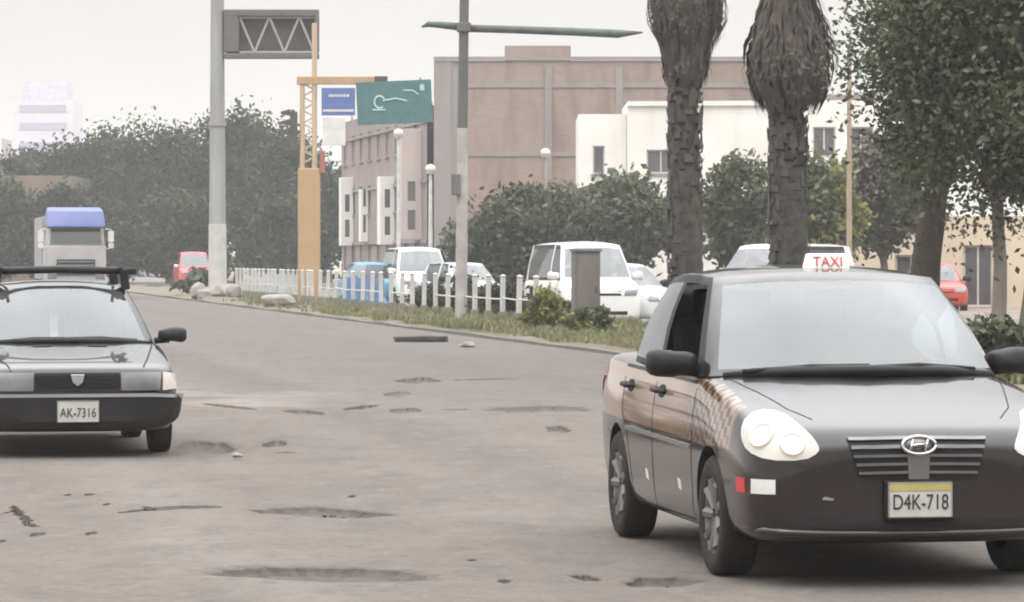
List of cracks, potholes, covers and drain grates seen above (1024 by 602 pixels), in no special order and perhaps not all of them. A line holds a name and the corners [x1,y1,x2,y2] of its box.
pothole [229,504,415,519]
pothole [468,404,602,413]
pothole [615,574,718,588]
pothole [565,573,606,582]
pothole [259,438,291,448]
pothole [170,438,246,455]
pothole [388,375,448,384]
pothole [338,403,383,411]
pothole [178,563,471,583]
pothole [542,424,574,433]
